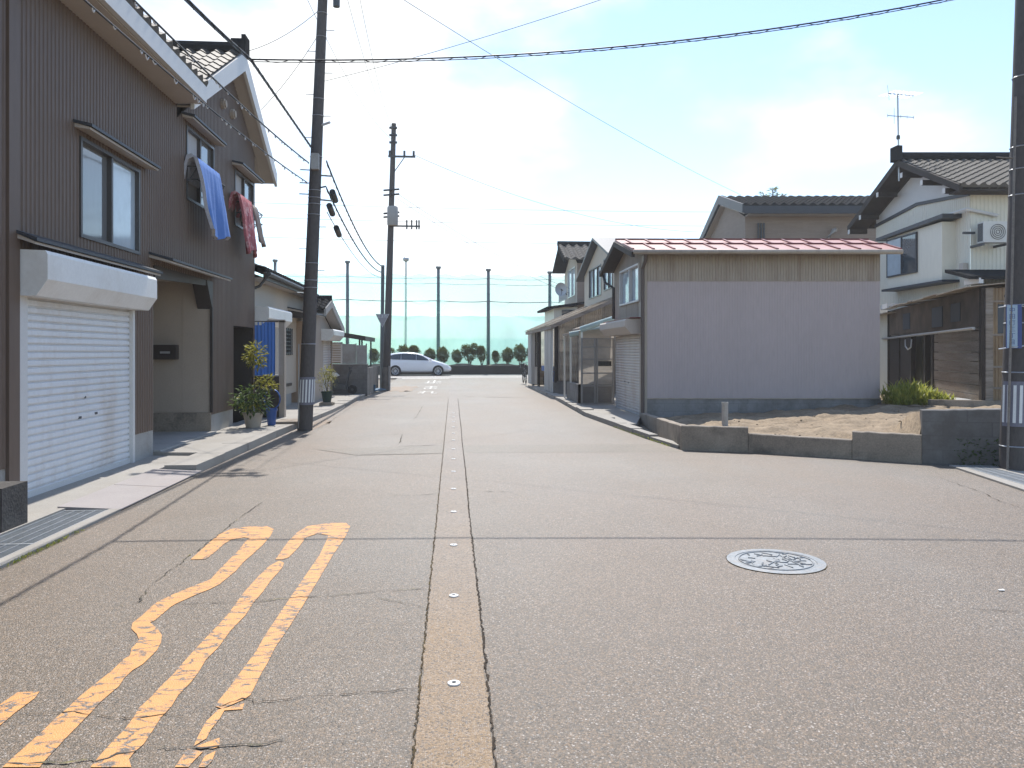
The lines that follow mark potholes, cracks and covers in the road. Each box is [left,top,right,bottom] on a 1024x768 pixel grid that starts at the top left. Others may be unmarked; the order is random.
drain grate [0,508,121,568]
manhole cover [725,549,827,574]
